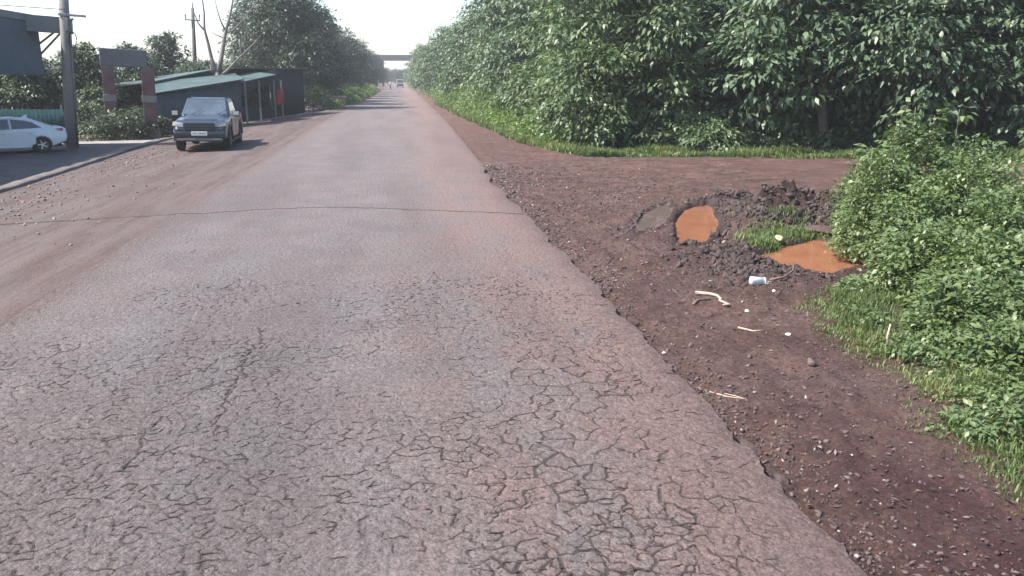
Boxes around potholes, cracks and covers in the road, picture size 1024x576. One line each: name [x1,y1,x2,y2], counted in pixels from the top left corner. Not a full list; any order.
pothole [627,202,674,232]
pothole [747,237,865,274]
pothole [674,195,722,243]
crack [0,251,786,576]
